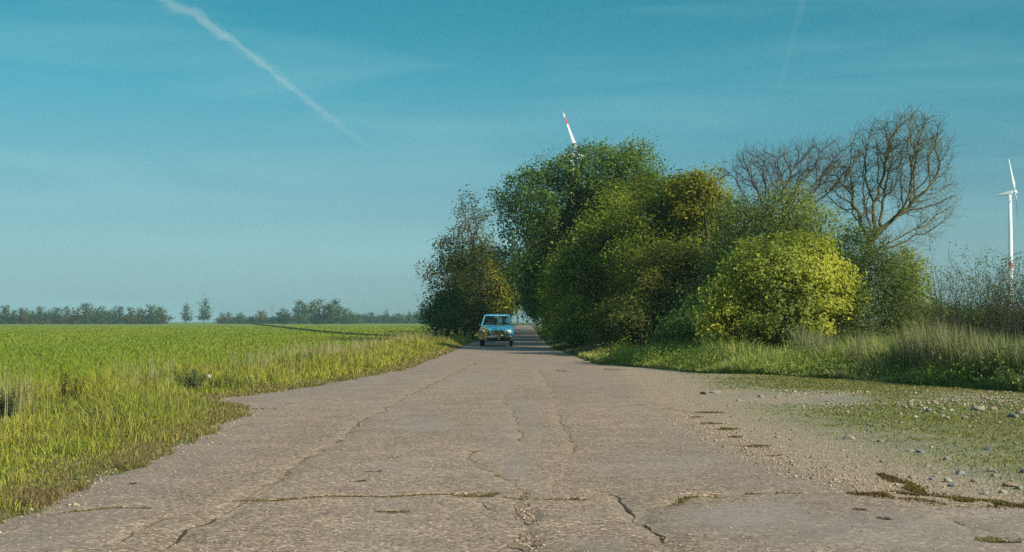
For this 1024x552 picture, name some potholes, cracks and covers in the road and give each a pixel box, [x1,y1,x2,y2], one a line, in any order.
crack [539,370,578,452]
crack [607,491,803,550]
crack [62,506,216,548]
crack [469,450,586,512]
